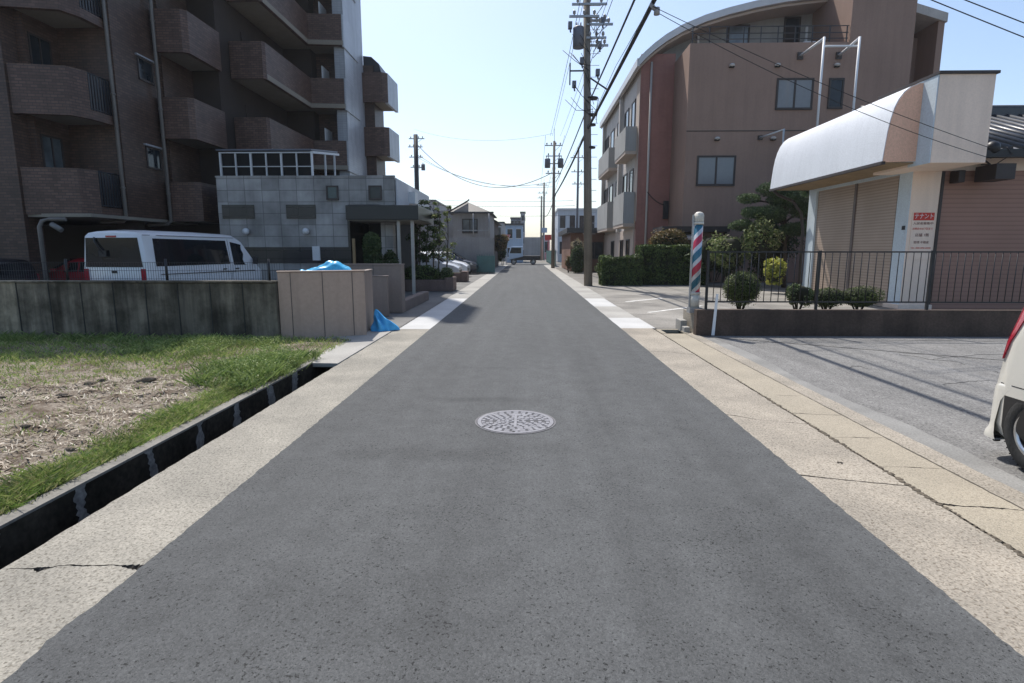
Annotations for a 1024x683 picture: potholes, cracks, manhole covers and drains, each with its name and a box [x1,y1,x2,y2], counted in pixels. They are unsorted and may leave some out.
manhole cover [475,410,556,434]
crack [10,564,143,573]
